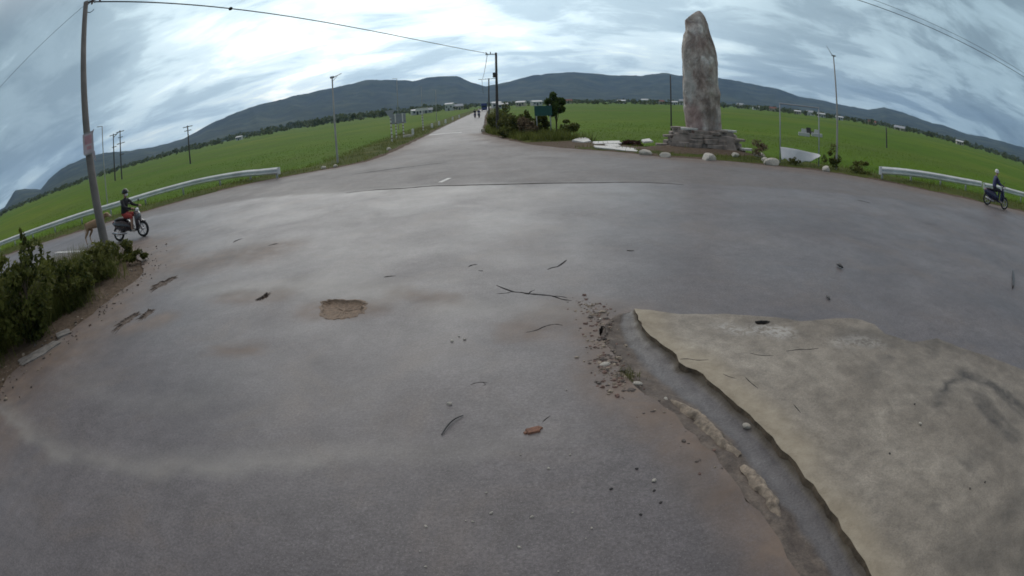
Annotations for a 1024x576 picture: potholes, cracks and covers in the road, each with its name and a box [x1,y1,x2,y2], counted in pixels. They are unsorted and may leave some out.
pothole [319,299,368,320]
pothole [149,275,178,292]
pothole [111,311,142,332]
